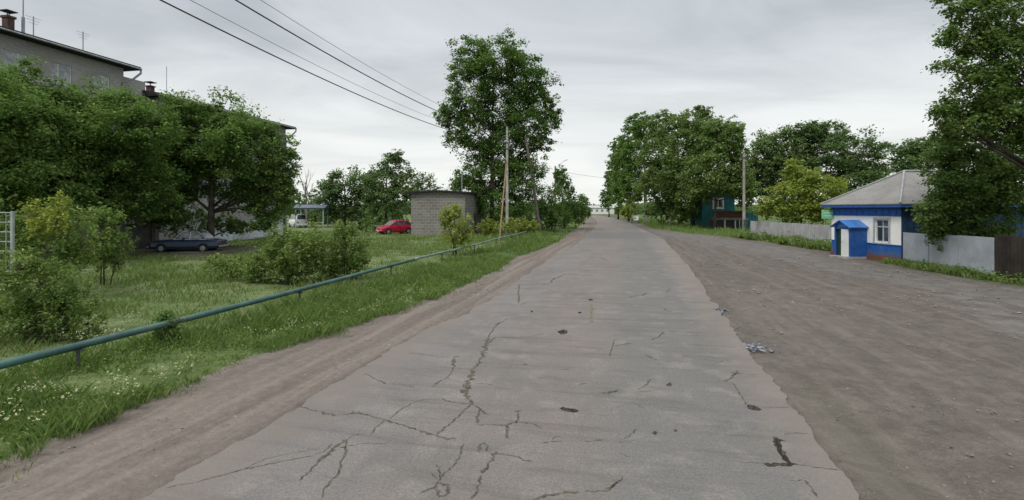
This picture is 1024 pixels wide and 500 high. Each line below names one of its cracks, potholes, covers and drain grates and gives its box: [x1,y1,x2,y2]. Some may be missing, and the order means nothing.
crack [683,345,786,408]
crack [584,428,637,457]
crack [532,475,625,500]
crack [167,250,608,499]
crack [564,369,652,409]
